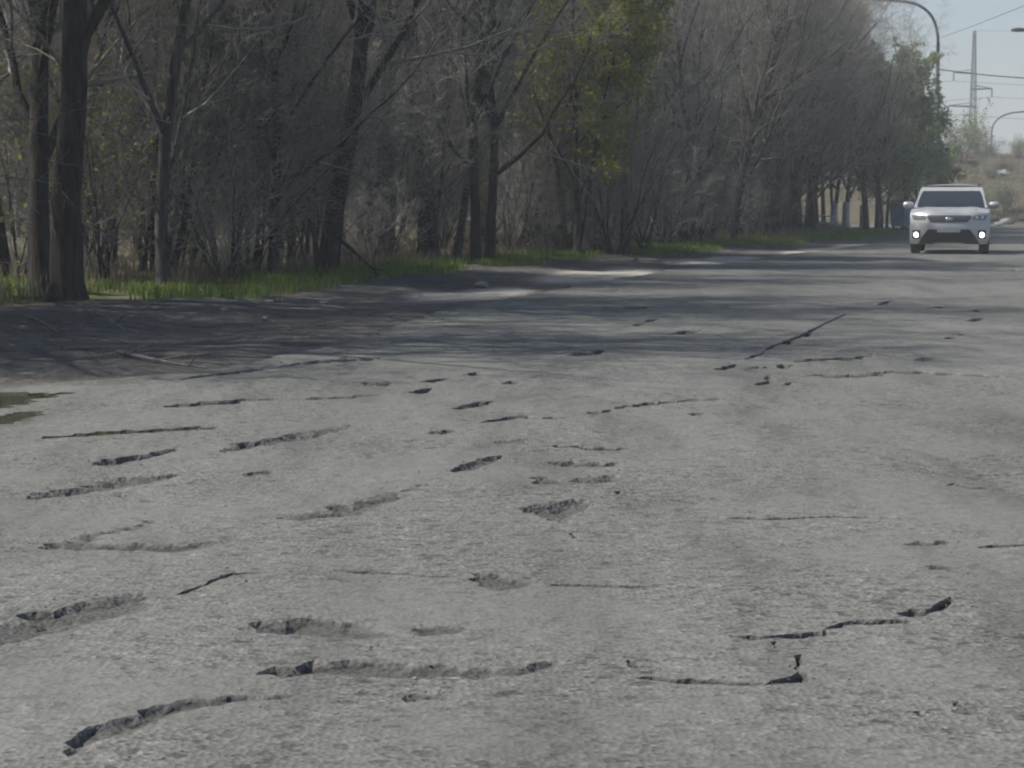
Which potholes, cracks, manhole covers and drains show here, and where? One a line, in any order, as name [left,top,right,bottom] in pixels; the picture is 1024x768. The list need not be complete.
pothole [450,455,505,473]
pothole [92,446,182,466]
pothole [0,591,166,646]
pothole [519,498,601,526]
crack [635,676,767,686]
pothole [22,472,188,500]
crack [170,572,263,598]
pothole [34,519,252,554]
pothole [219,424,360,452]
crack [744,314,1024,378]
crack [728,619,915,640]
pothole [468,572,546,591]
